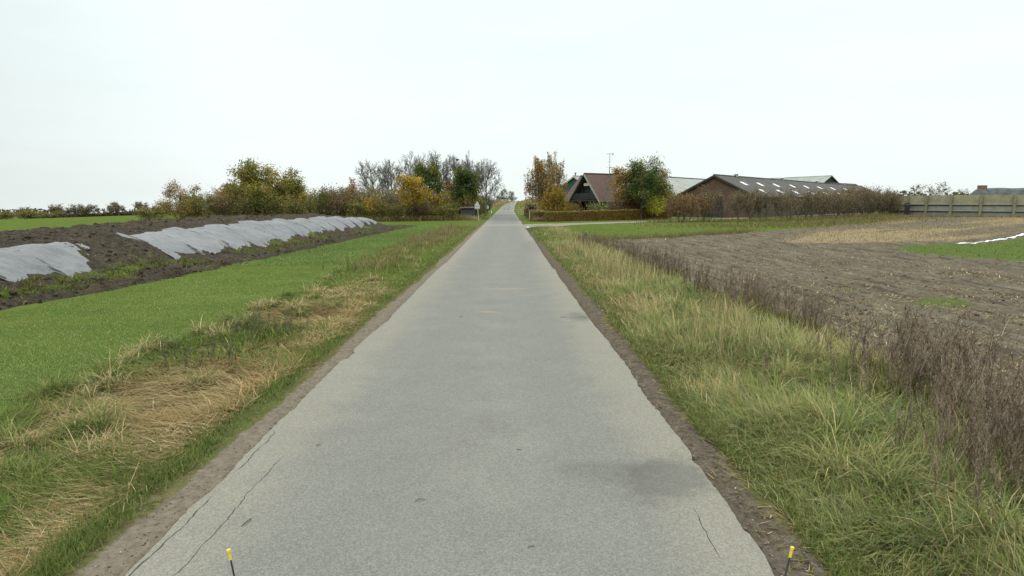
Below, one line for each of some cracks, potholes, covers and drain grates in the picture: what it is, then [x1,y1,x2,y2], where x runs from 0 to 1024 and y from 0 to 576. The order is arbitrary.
crack [128,430,283,576]
